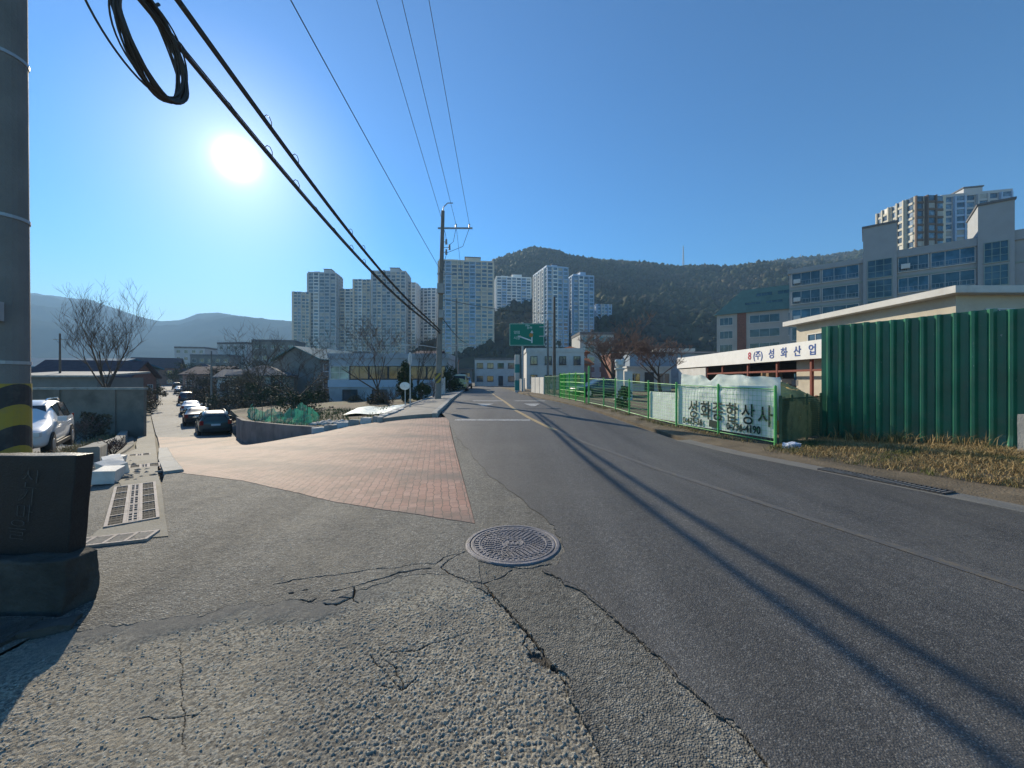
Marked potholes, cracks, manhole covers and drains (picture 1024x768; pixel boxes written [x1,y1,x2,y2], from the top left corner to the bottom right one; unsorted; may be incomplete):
drain grate [86,529,160,548]
drain grate [817,467,956,495]
crack [139,644,208,747]
drain grate [103,481,160,528]
manhole cover [466,525,560,567]
crack [287,551,571,689]
